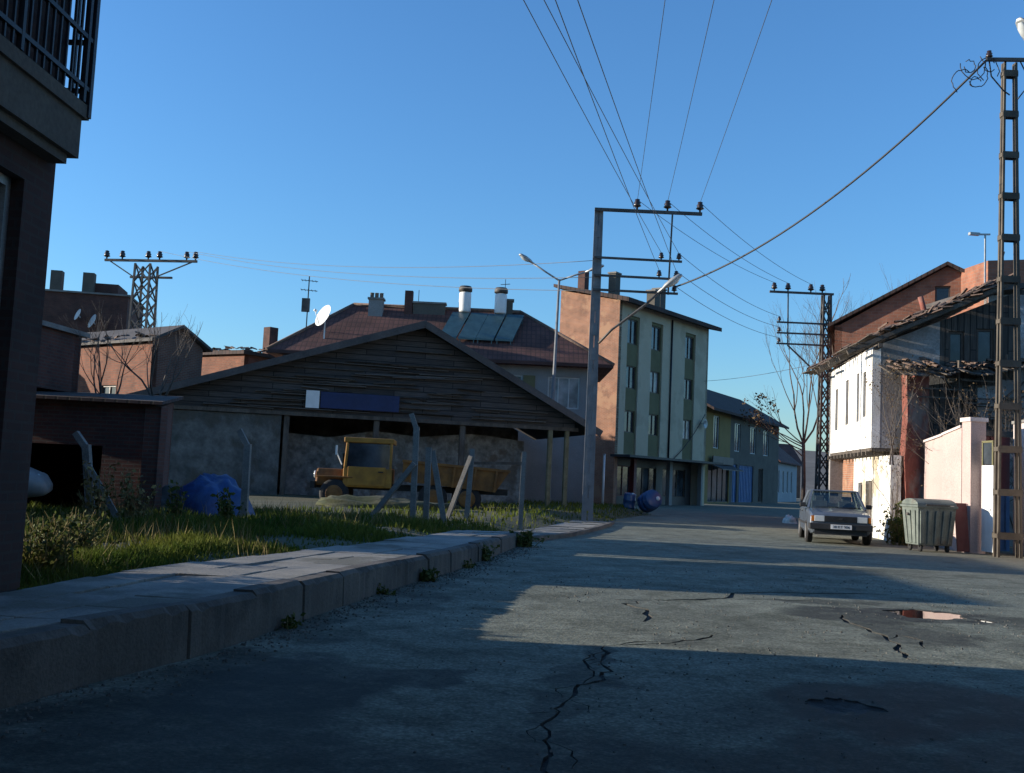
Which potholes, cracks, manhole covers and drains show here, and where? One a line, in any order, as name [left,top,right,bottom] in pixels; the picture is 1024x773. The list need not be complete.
crack [615,599,653,622]
pothole [882,609,966,620]
crack [839,615,925,660]
pothole [804,697,889,714]
crack [526,635,713,773]
